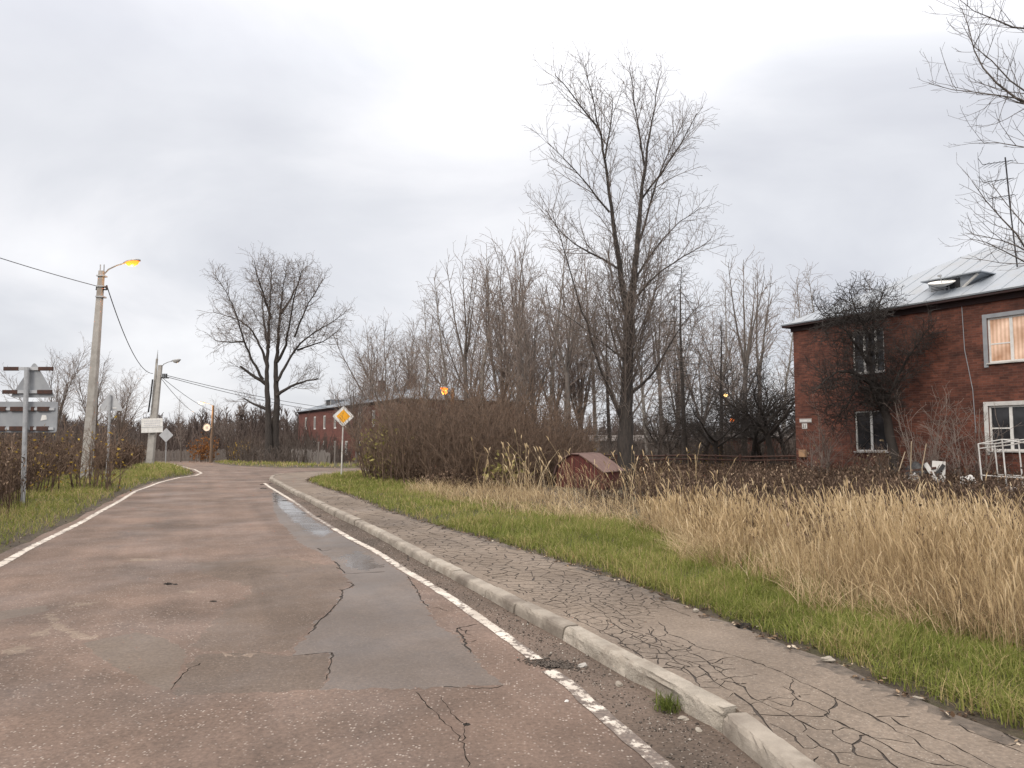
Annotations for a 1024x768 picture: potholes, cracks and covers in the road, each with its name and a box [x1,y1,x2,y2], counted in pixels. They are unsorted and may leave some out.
crack [294,652,334,680]
